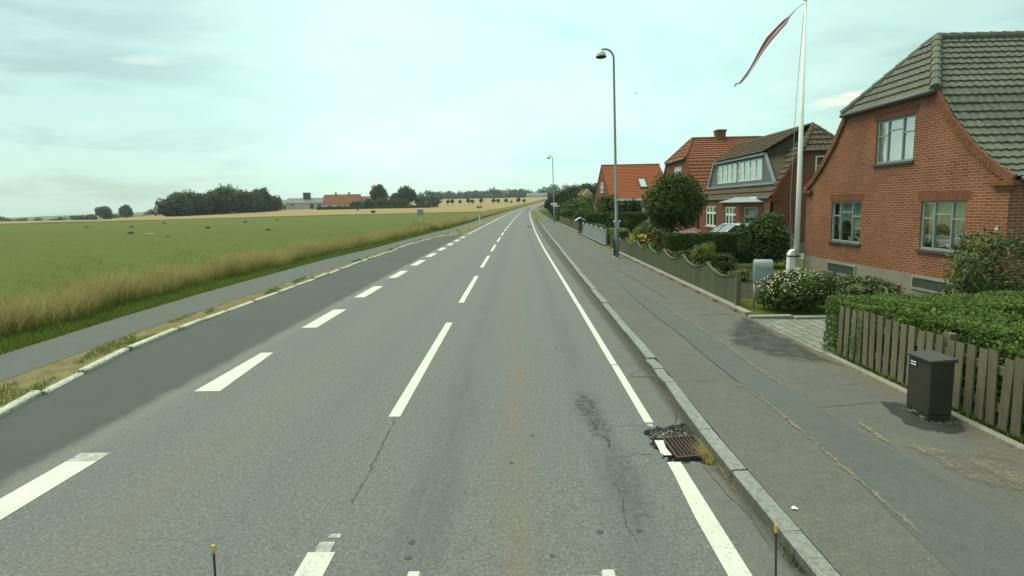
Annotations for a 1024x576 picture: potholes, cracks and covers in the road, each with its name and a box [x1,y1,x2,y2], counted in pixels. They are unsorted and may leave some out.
crack [822,401,895,447]
drain grate [662,435,707,461]
